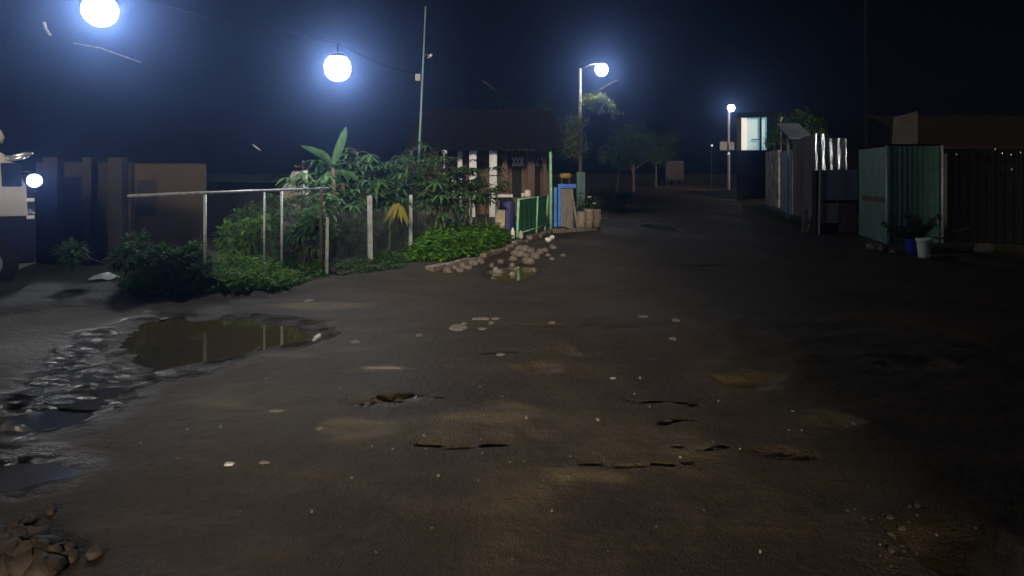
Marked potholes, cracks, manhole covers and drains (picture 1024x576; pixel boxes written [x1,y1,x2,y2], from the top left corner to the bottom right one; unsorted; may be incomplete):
crack [409,441,513,450]
pothole [89,384,140,396]
pothole [336,391,426,408]
pothole [105,314,328,377]
crack [547,444,734,469]
crack [621,398,711,426]
